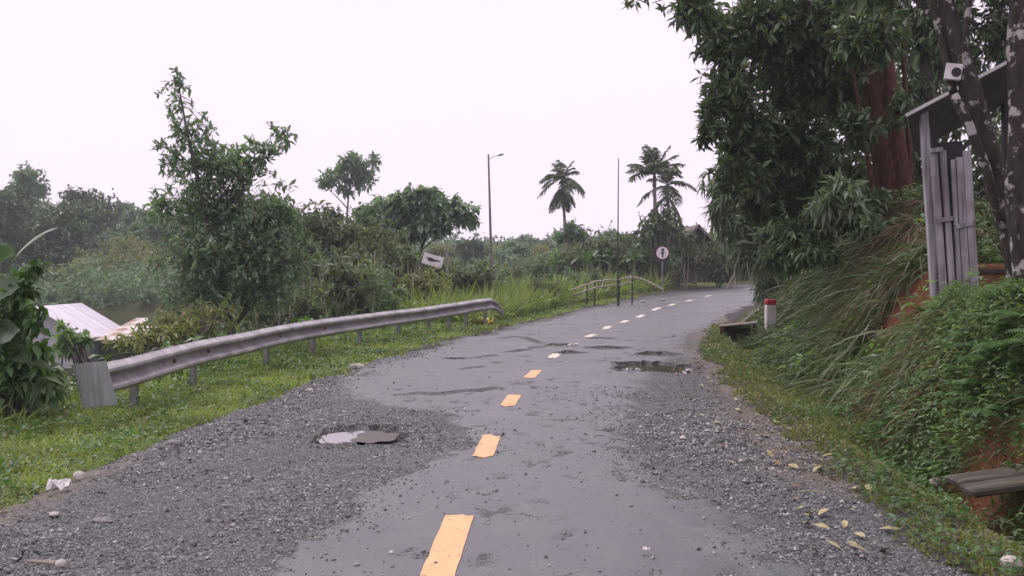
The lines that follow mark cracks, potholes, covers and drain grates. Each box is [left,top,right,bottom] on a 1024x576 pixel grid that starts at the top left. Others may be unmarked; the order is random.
pothole [609,360,707,374]
crack [393,386,505,396]
crack [460,336,547,369]
